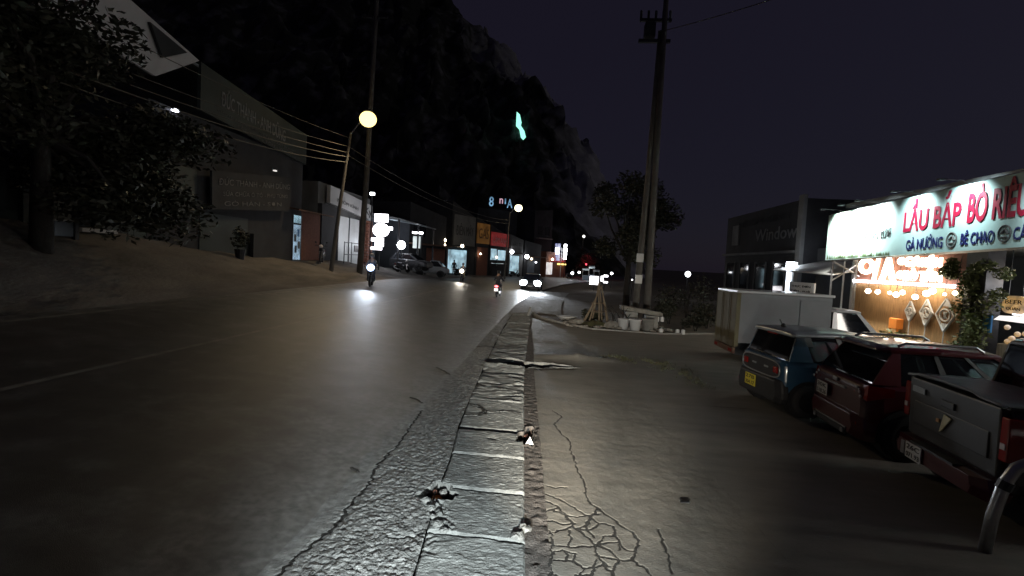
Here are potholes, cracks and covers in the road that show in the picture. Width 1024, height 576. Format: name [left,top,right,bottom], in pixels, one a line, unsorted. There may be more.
crack [465,404,521,415]
pothole [516,426,536,449]
crack [541,410,674,576]
pothole [413,482,460,502]
